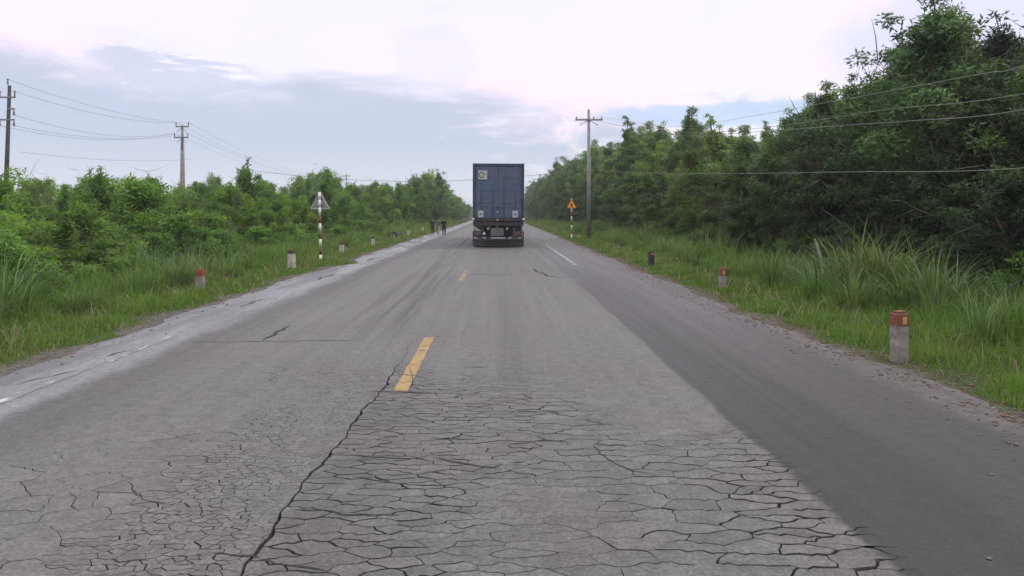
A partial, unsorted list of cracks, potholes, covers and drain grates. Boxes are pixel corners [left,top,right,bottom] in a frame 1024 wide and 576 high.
crack [241,326,331,342]
crack [0,339,917,576]
